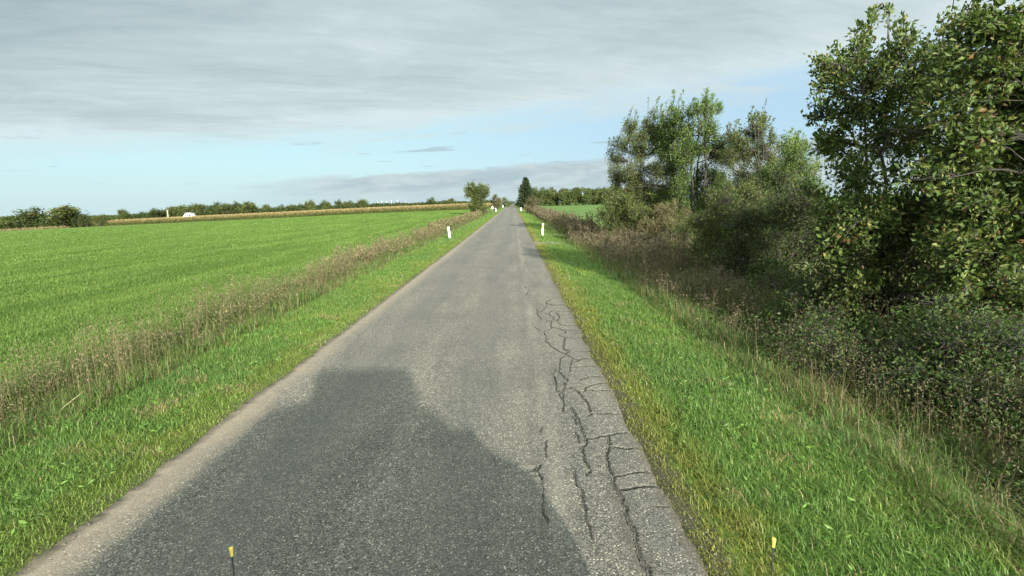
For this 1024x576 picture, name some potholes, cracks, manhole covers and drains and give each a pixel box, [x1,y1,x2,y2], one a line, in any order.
crack [509,275,670,576]
